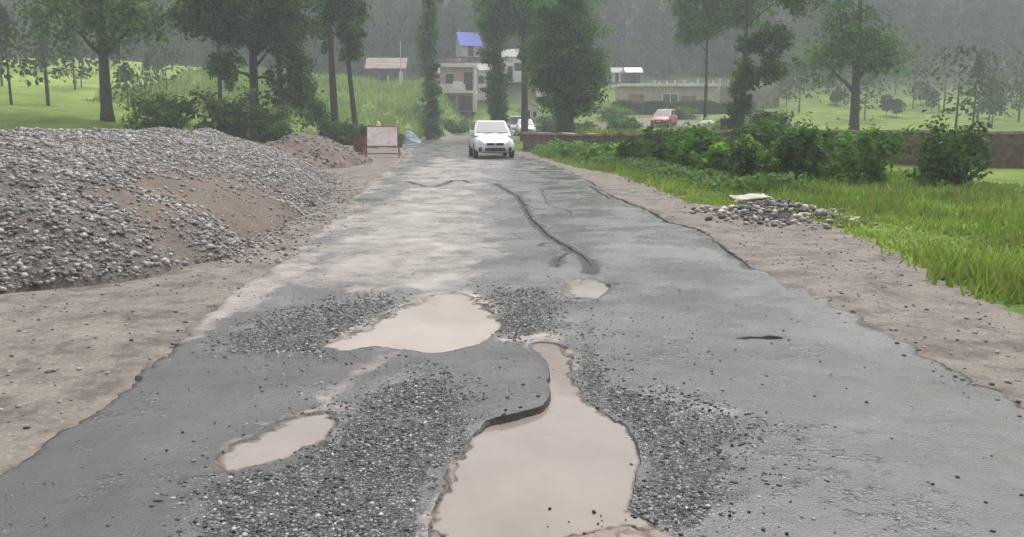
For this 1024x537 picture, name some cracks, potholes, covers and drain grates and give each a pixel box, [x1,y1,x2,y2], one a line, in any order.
crack [497,180,752,272]
pothole [428,341,669,537]
pothole [560,277,611,300]
pothole [214,410,339,473]
pothole [318,292,503,353]
